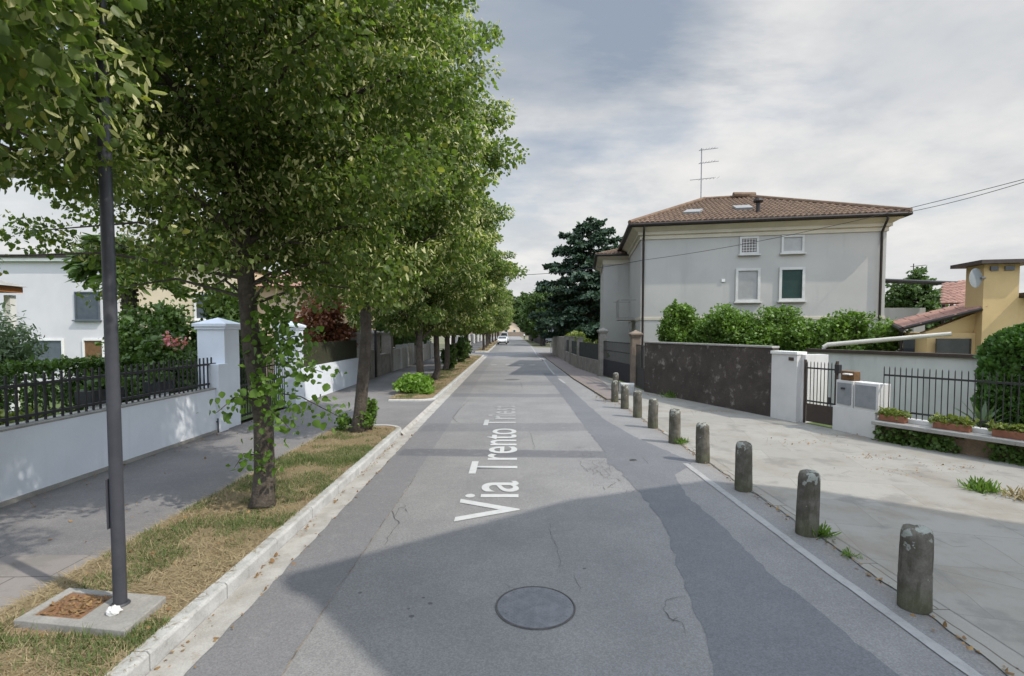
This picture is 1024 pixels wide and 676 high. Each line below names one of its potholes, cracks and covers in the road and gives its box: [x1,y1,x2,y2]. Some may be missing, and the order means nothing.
manhole cover [495,586,576,630]
